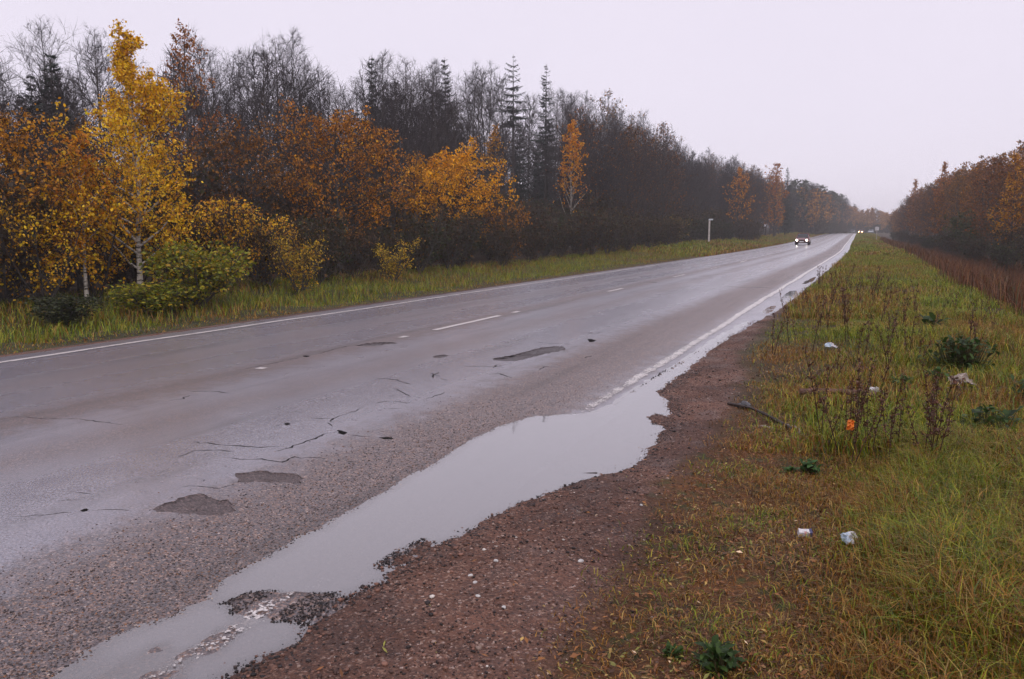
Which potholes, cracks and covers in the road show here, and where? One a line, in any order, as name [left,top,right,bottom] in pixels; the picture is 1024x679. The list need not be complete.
pothole [152,493,237,515]
crack [179,372,446,462]
pothole [235,470,305,484]
pothole [493,346,565,361]
